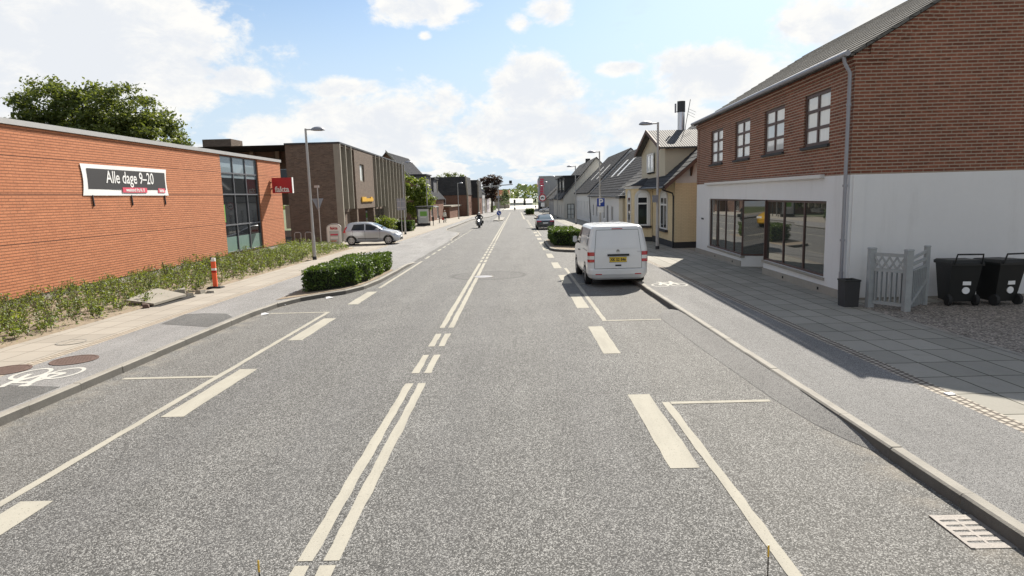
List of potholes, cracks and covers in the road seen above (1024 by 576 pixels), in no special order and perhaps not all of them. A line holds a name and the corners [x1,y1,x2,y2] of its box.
manhole cover [49,354,99,366]
drain grate [928,514,1018,549]
manhole cover [0,364,33,375]
